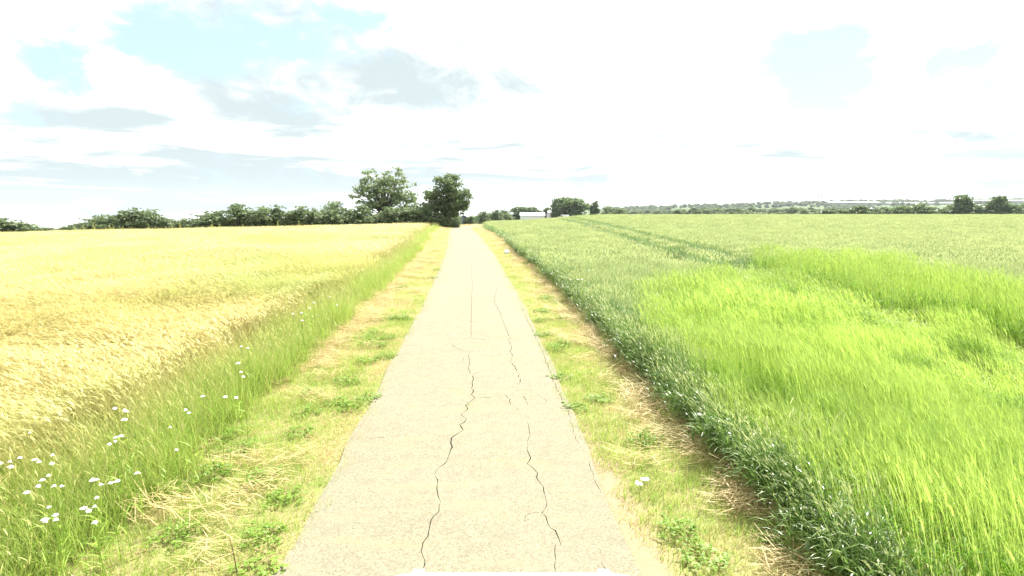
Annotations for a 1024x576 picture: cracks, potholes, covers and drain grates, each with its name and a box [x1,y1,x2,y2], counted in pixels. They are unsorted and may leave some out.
crack [421,299,578,571]
